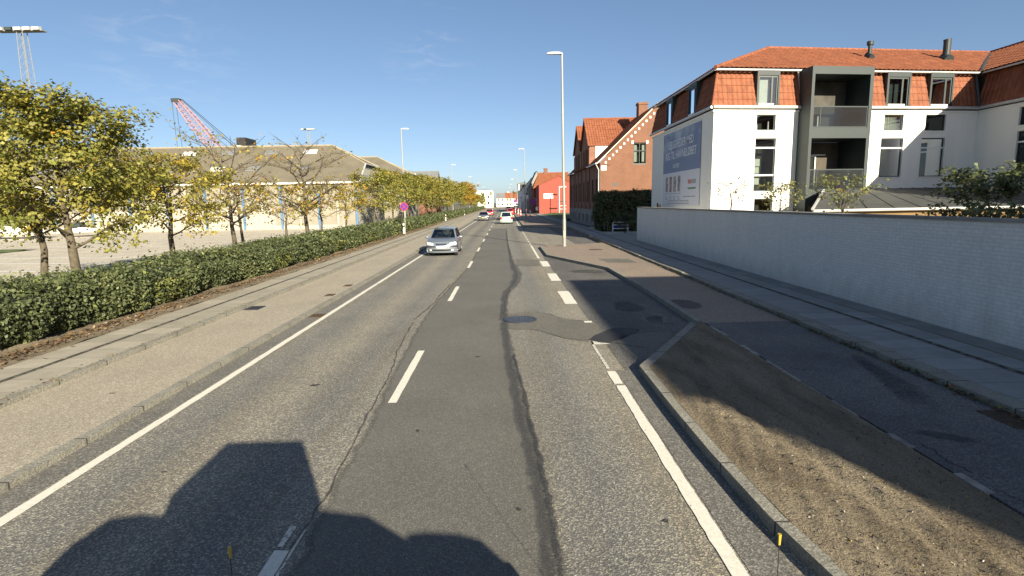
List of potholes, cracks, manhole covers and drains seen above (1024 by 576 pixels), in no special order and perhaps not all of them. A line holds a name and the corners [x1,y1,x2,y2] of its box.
crack [290,285,450,548]
